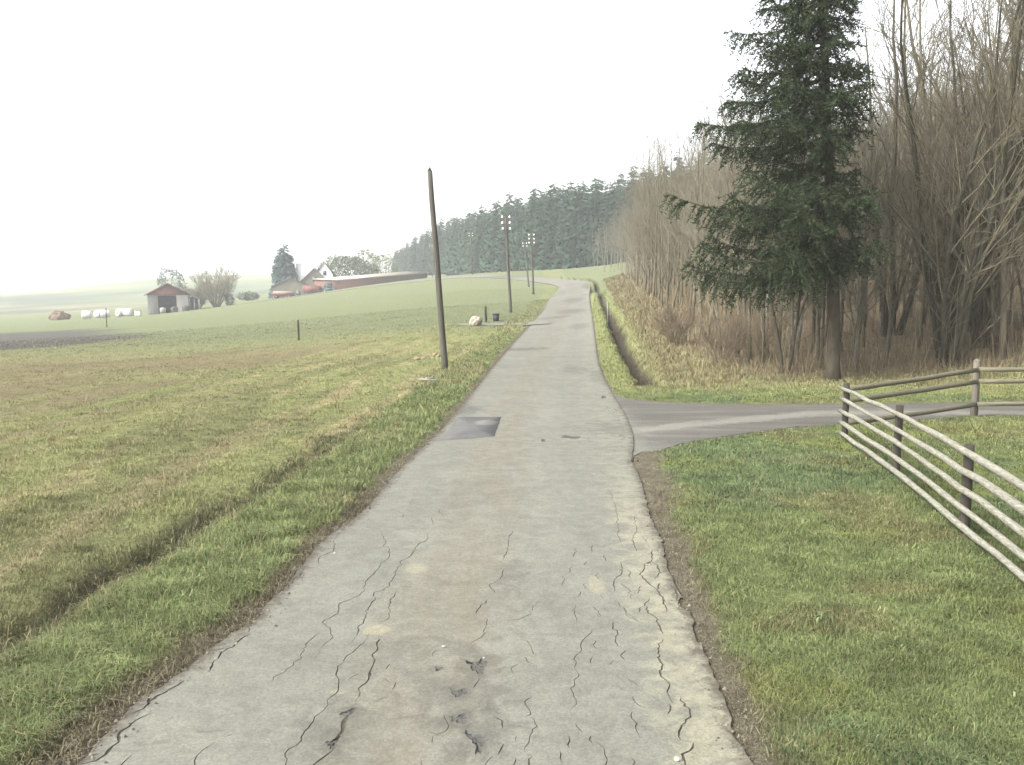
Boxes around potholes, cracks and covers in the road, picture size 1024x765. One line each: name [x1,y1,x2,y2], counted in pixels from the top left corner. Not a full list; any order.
pothole [450,713,470,724]
pothole [449,687,471,697]
crack [77,681,184,765]
crack [471,531,513,643]
pothole [458,657,488,674]
crack [208,624,252,672]
pothole [463,729,489,755]
crack [561,492,694,765]
crack [270,508,442,765]
crack [485,697,538,765]
